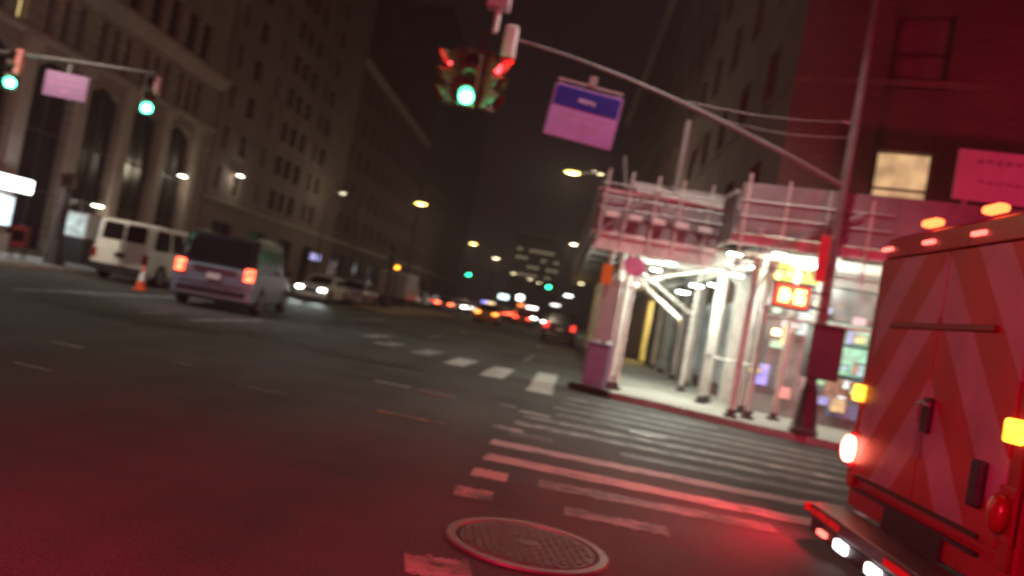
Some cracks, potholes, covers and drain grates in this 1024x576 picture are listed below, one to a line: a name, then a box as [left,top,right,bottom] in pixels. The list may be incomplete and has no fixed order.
manhole cover [446,517,609,576]
